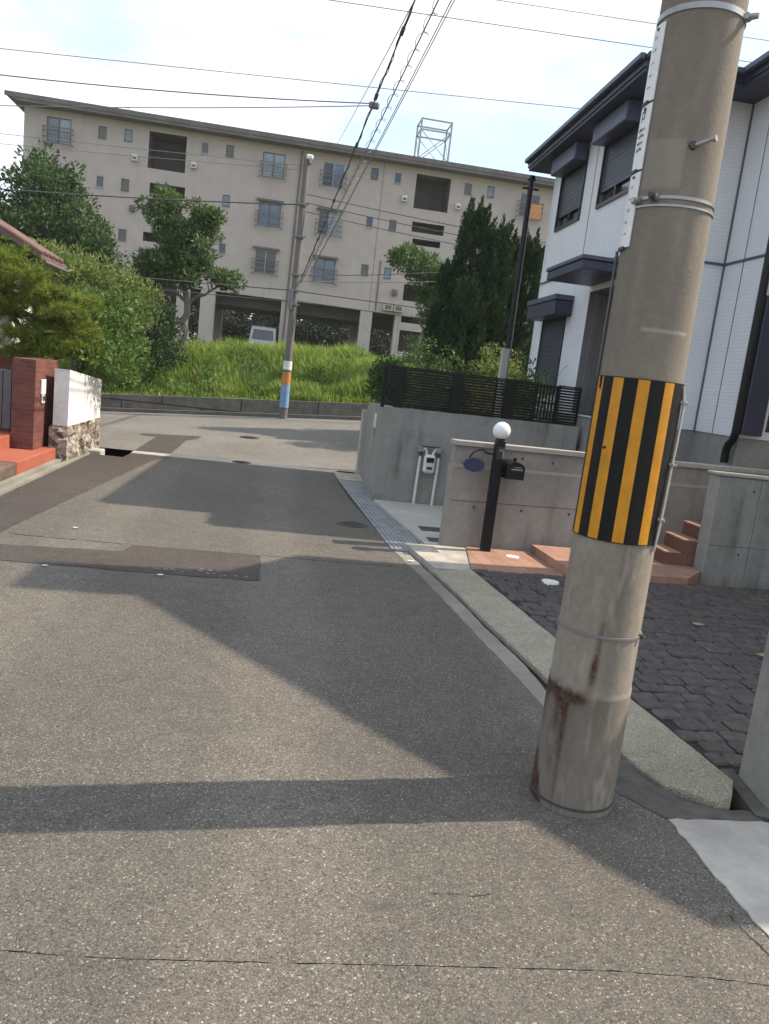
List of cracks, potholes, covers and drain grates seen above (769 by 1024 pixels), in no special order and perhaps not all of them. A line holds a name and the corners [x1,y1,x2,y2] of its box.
drain grate [347,492,423,554]
drain grate [338,480,369,494]
